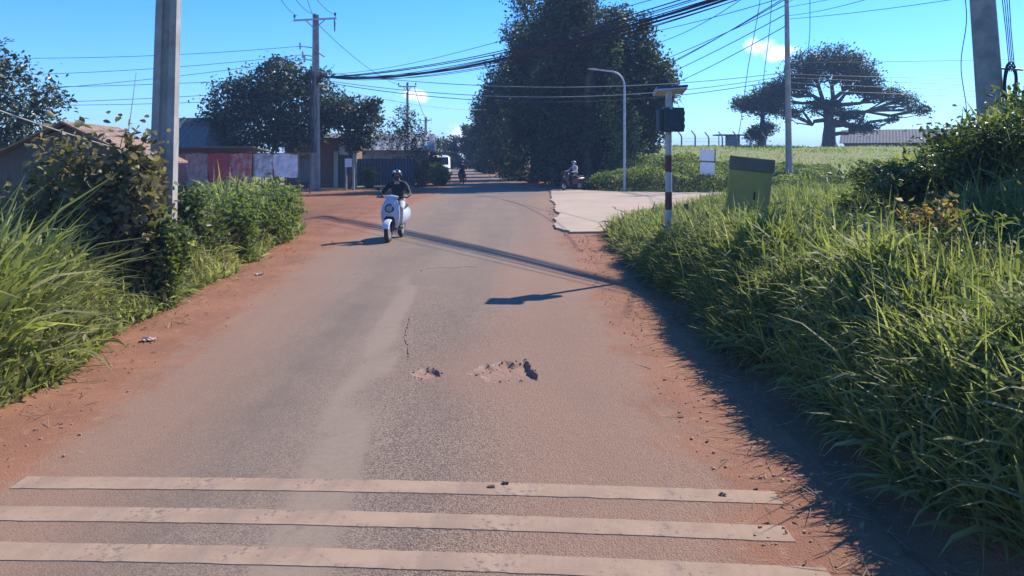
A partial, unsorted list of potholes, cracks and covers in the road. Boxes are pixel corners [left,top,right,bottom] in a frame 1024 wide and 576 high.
pothole [411,367,443,380]
pothole [466,358,538,383]
